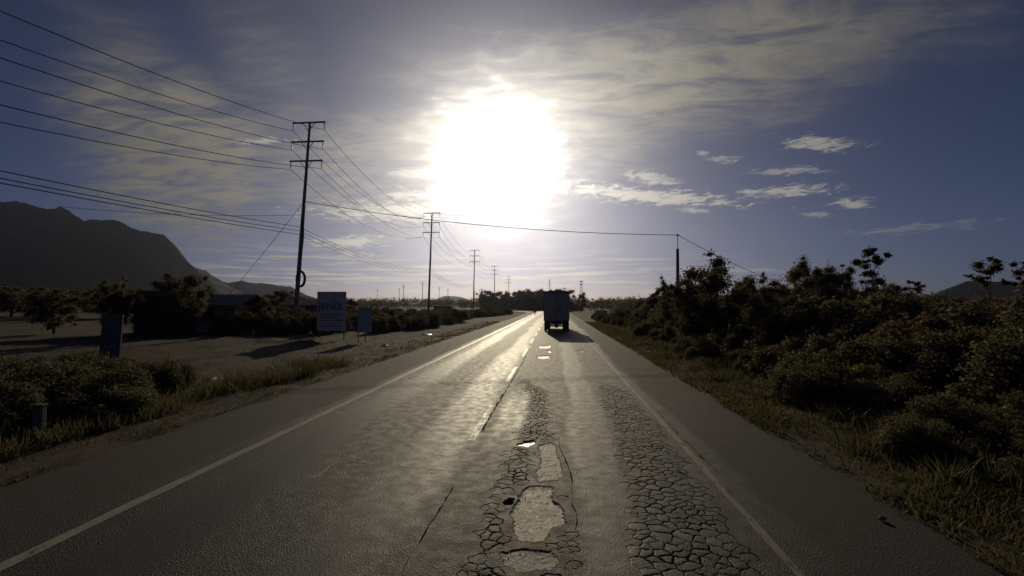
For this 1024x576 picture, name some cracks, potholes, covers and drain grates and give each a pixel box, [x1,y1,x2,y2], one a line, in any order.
crack [456,379,593,576]
crack [598,385,760,576]
crack [308,462,454,576]
